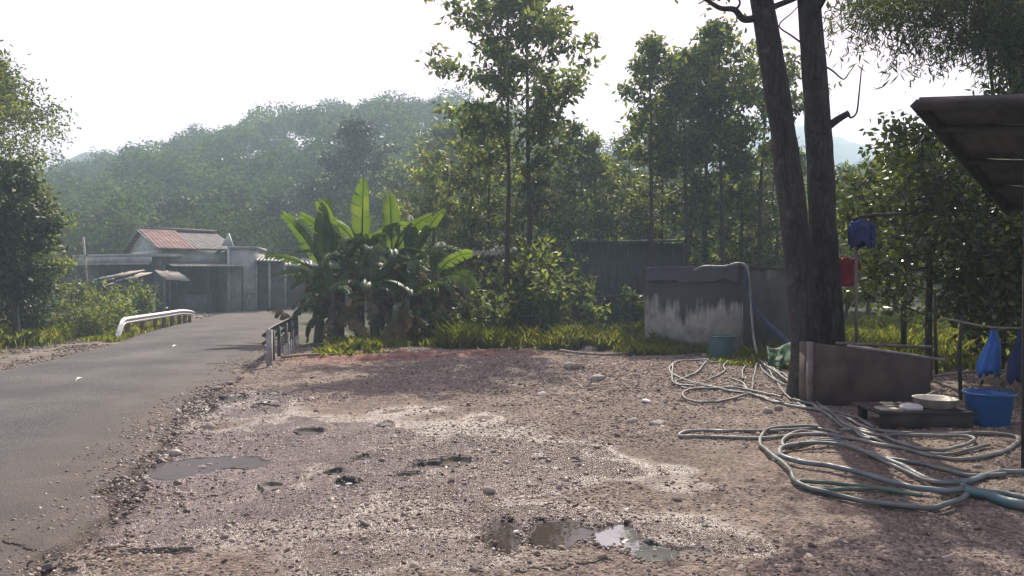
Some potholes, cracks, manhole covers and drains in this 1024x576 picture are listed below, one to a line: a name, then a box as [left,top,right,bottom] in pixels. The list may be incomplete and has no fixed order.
pothole [334,477,364,486]
pothole [485,519,517,555]
pothole [293,427,326,436]
pothole [525,519,596,550]
pothole [257,481,285,492]
pothole [322,467,344,475]
pothole [629,540,680,563]
pothole [145,455,245,480]
pothole [442,455,476,467]
pothole [221,456,271,470]
pothole [594,521,640,552]
pothole [410,460,443,468]
